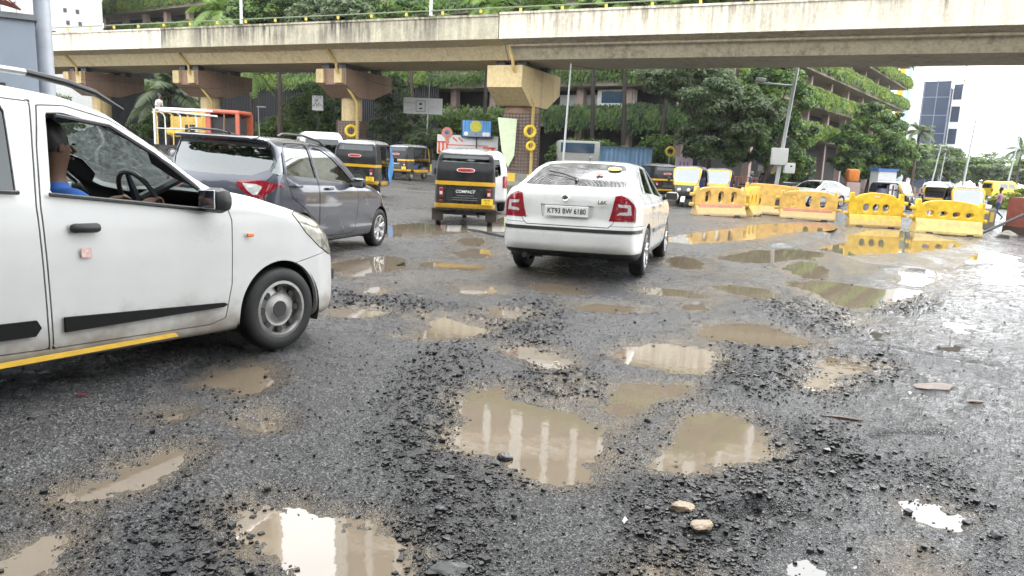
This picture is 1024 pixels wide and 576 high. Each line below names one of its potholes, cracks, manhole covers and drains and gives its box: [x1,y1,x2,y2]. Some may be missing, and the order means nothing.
pothole [179,478,454,576]
pothole [881,486,992,536]
pothole [0,430,230,518]
pothole [760,276,944,313]
pothole [318,298,411,320]
pothole [479,333,597,375]
pothole [589,330,747,378]
pothole [615,398,807,485]
pothole [175,354,300,404]
pothole [330,253,422,282]
pothole [373,304,524,344]
pothole [0,508,117,576]
